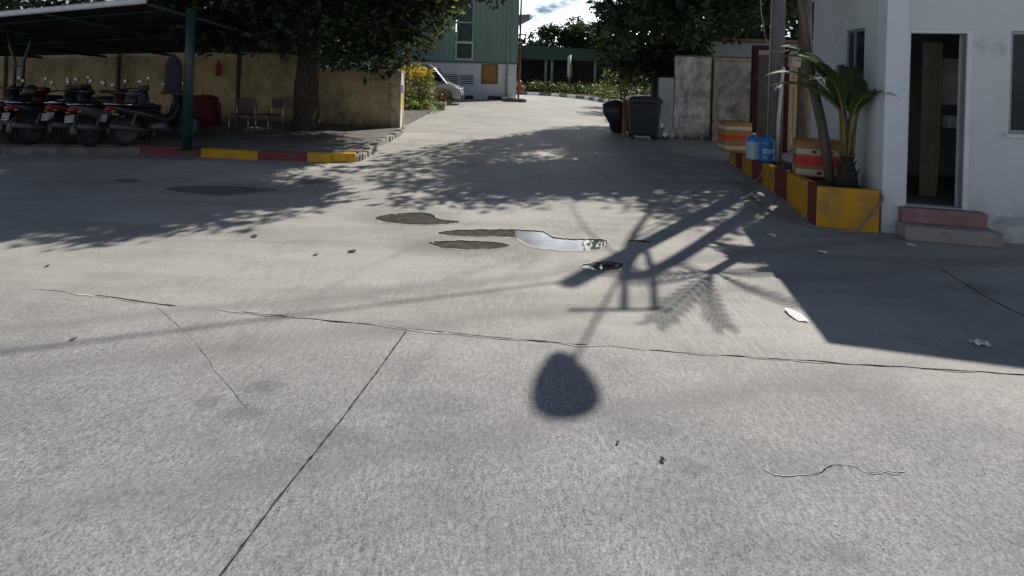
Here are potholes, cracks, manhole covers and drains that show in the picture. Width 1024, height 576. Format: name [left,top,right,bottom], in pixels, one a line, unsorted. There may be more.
crack [39,289,1024,576]
